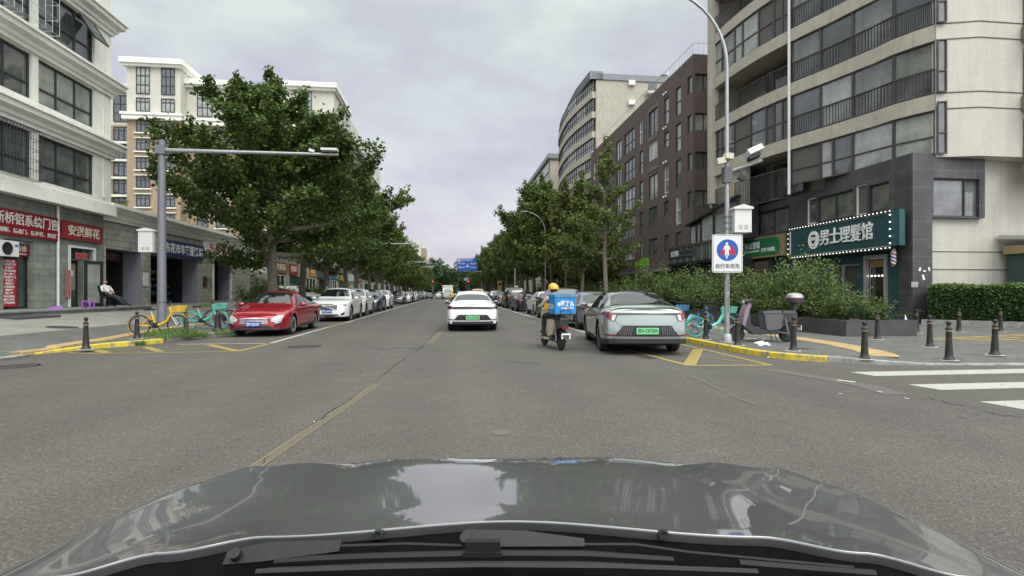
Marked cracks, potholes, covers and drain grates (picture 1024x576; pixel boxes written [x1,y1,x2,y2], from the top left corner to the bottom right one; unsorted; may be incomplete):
crack [301,394,358,432]
